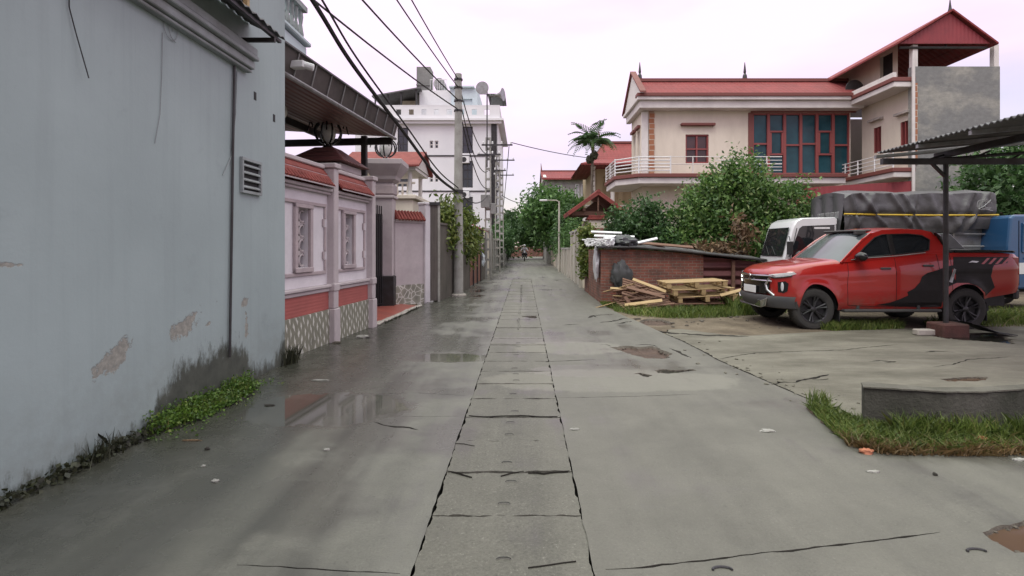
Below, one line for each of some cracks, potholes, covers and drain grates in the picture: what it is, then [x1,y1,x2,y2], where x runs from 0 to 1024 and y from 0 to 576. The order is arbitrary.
crack [528,561,576,569]
crack [375,416,423,430]
pothole [983,520,1024,553]
crack [248,565,400,574]
pothole [611,346,672,359]
crack [929,351,1002,367]
crack [606,532,939,570]
crack [640,331,897,363]
